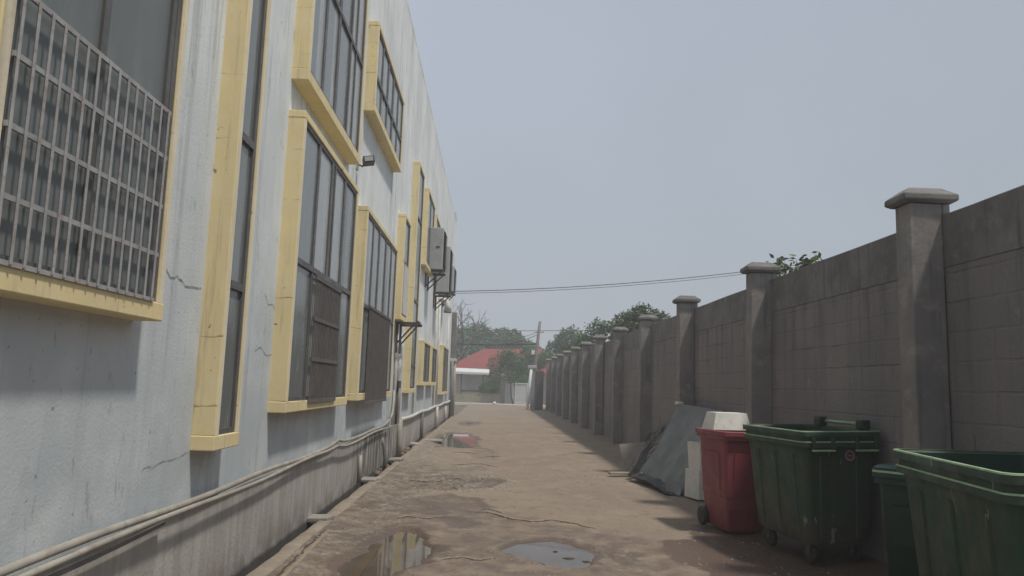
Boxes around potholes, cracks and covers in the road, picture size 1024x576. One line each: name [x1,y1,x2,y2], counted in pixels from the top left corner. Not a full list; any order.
pothole [428,432,483,448]
pothole [323,525,452,576]
pothole [494,536,614,569]
crack [480,508,600,529]
